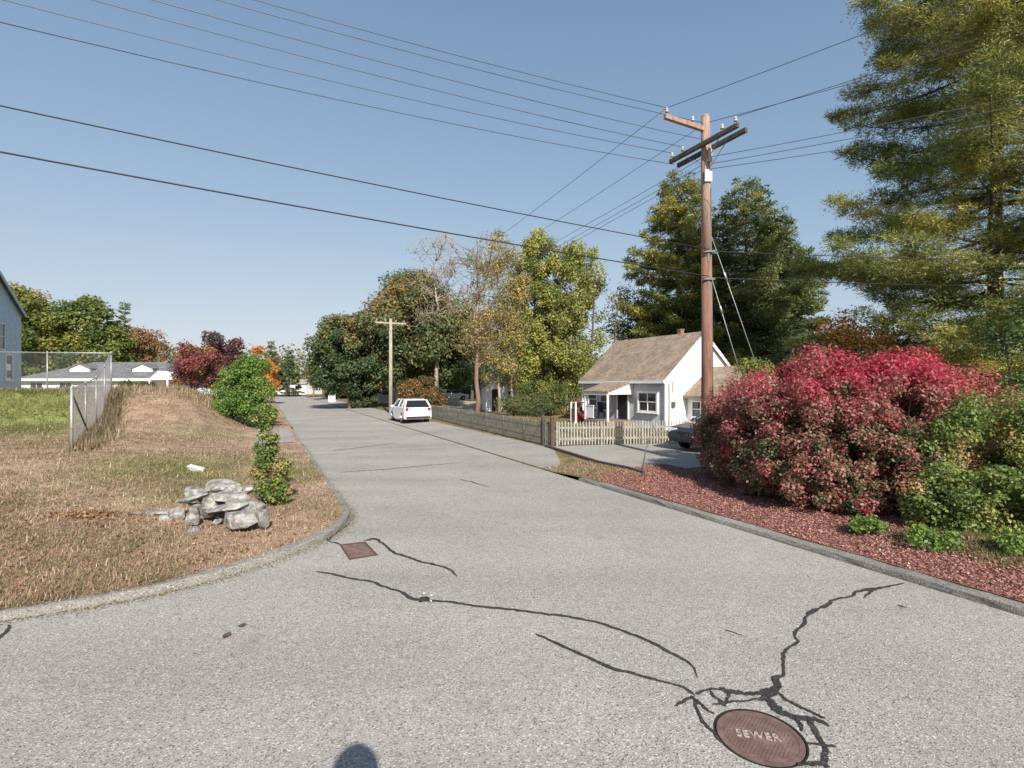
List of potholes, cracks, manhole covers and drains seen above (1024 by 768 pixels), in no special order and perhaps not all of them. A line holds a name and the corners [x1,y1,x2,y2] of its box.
crack [347,462,490,487]
crack [0,624,11,639]
crack [315,525,905,768]
manhole cover [713,709,810,768]
